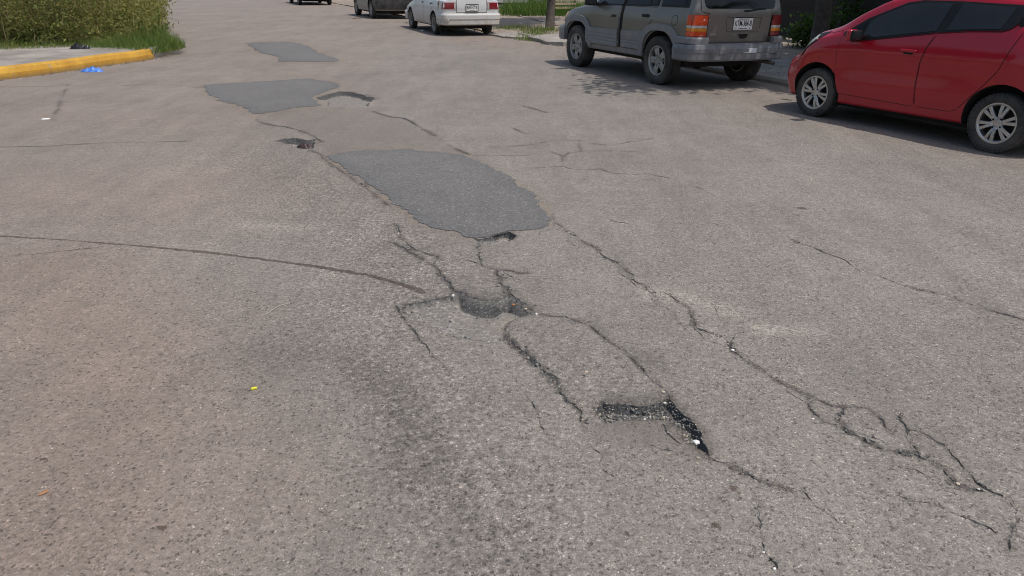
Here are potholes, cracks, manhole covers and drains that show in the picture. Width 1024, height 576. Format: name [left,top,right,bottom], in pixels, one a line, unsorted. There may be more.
pothole [596,399,711,459]
pothole [278,138,316,152]
crack [554,220,1024,552]
pothole [473,231,516,246]
crack [392,224,672,437]
pothole [316,91,374,107]
pothole [402,290,531,342]
crack [649,423,855,576]
crack [376,112,680,182]
